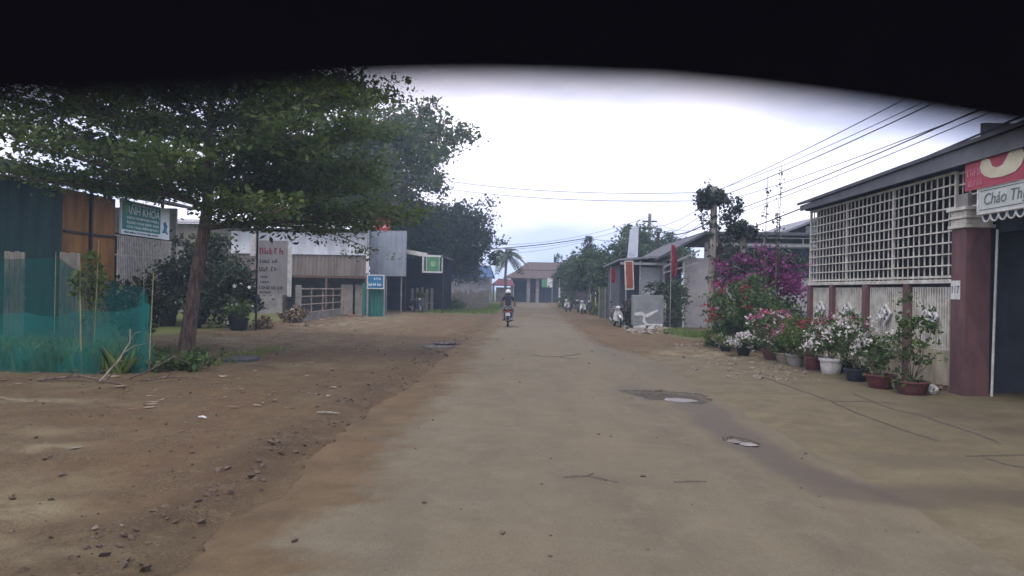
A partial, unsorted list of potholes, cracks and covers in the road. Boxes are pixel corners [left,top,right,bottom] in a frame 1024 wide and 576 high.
crack [563,473,617,483]
pothole [619,389,714,405]
pothole [417,340,459,350]
